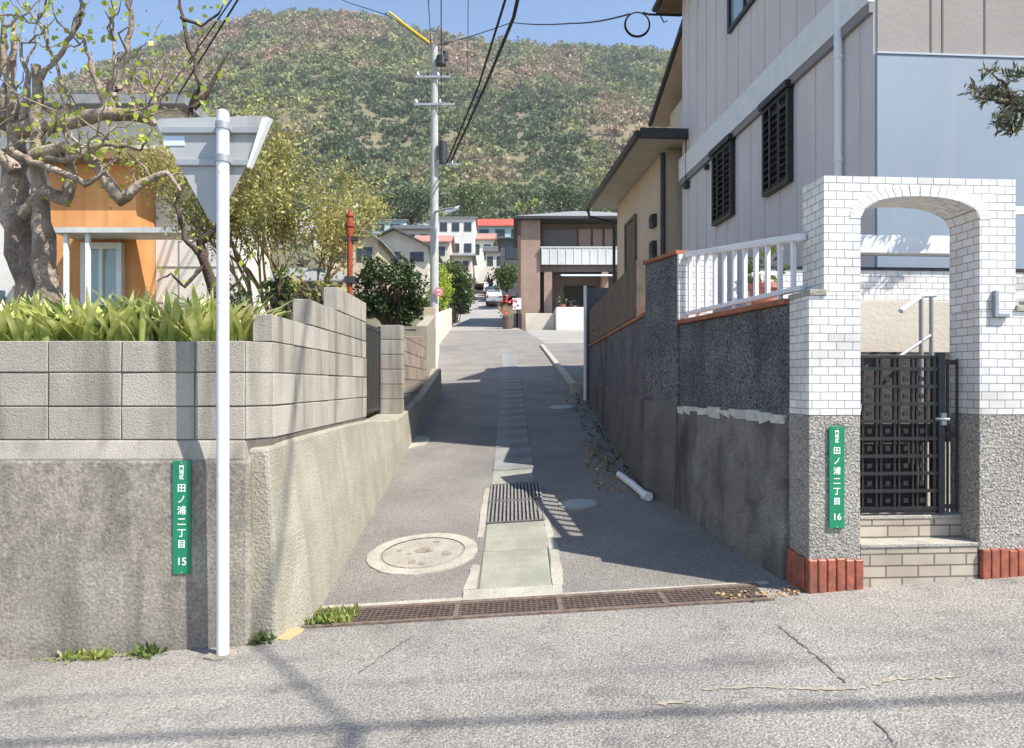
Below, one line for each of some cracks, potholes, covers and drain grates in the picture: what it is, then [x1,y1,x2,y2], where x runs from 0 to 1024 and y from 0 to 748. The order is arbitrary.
drain grate [301,583,775,629]
drain grate [487,481,546,524]
manhole cover [558,497,599,510]
crack [656,624,957,705]
manhole cover [366,533,478,576]
